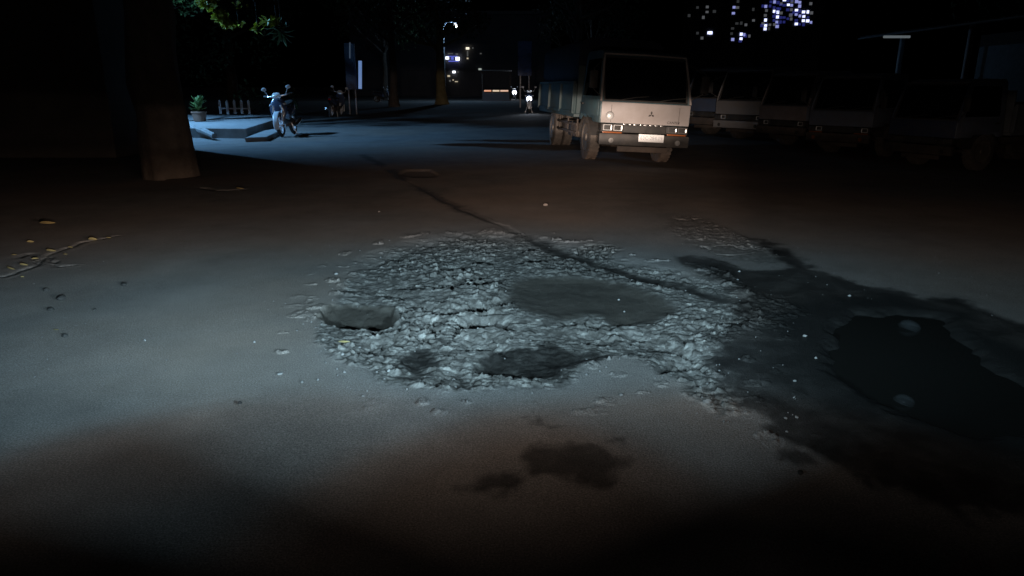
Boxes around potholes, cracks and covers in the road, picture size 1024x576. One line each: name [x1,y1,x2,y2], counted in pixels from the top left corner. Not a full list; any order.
crack [371,160,525,234]
crack [0,233,131,281]
pothole [306,229,763,424]
pothole [800,304,1024,448]
